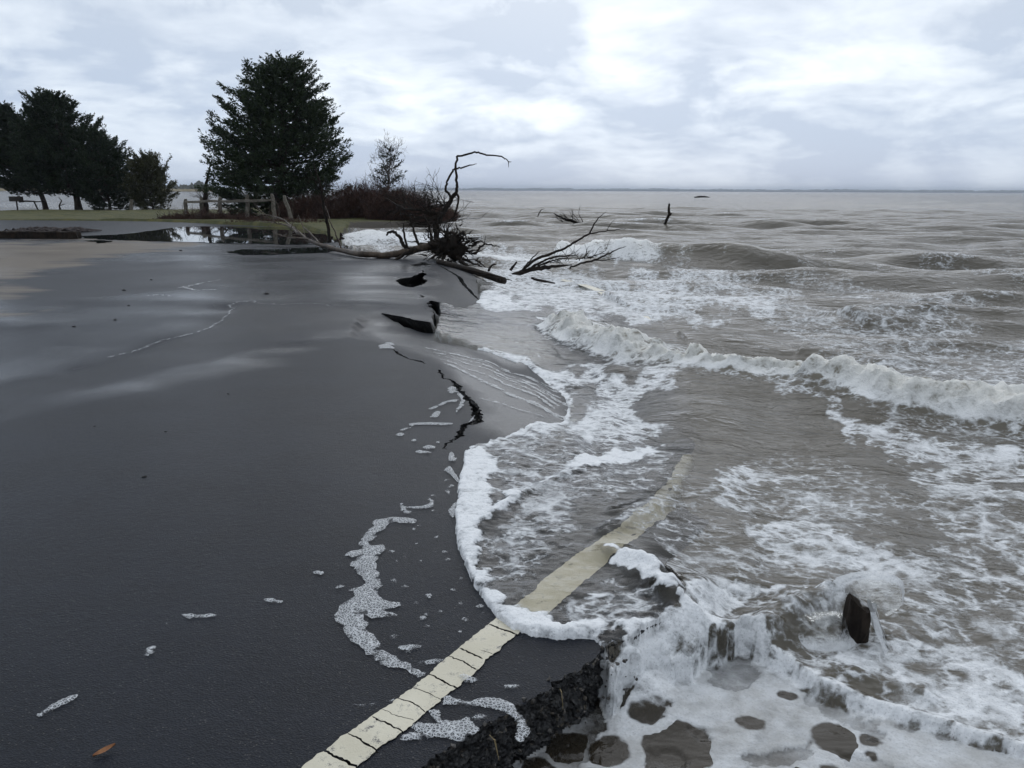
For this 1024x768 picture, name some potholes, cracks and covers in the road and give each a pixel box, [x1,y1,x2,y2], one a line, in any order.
crack [381,262,484,449]
